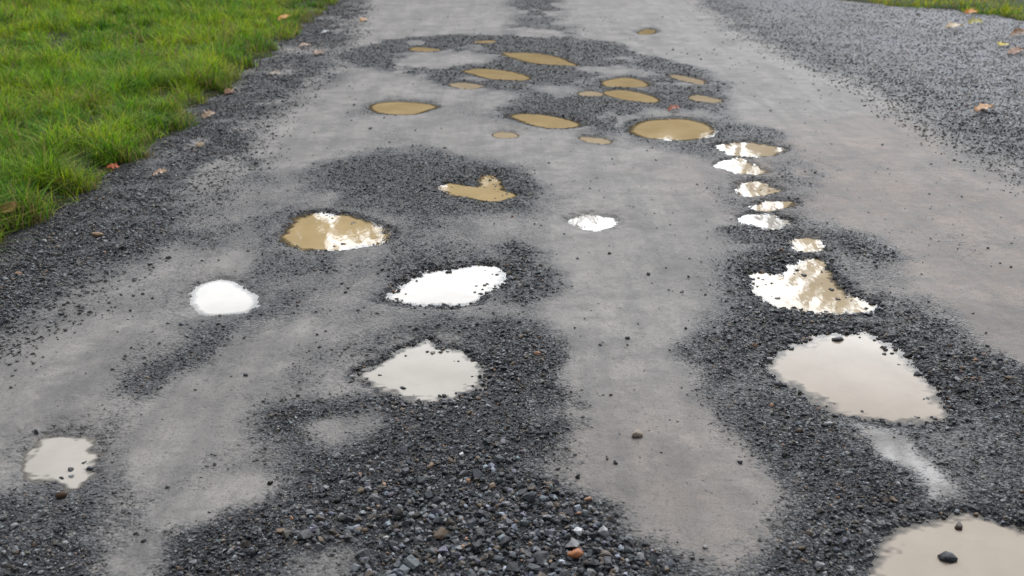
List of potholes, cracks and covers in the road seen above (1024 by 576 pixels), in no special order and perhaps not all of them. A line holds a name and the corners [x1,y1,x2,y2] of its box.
pothole [548,206,633,234]
pothole [259,205,410,254]
